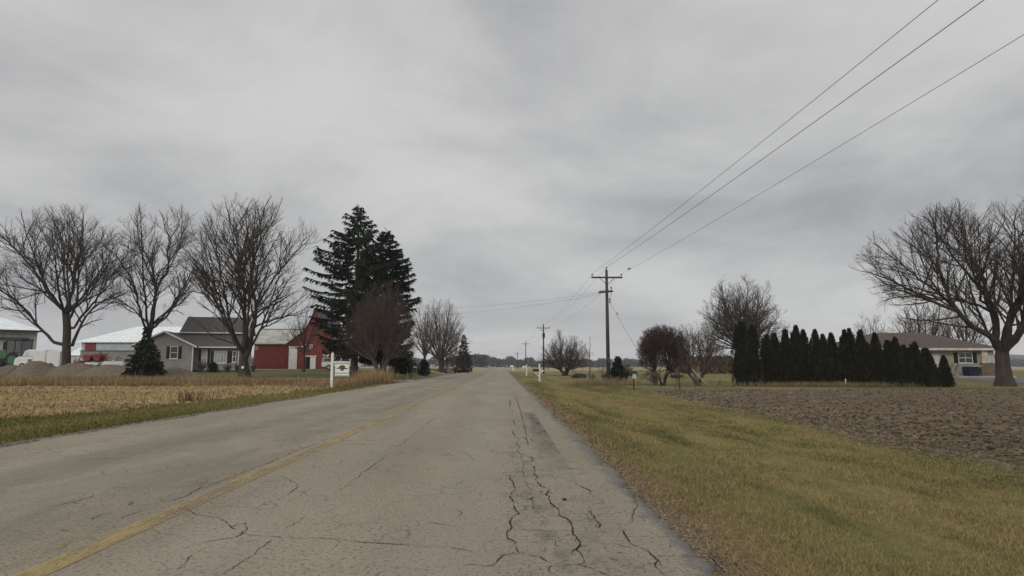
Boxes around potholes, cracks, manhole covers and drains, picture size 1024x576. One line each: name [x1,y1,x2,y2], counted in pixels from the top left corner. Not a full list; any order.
crack [161,401,725,576]
